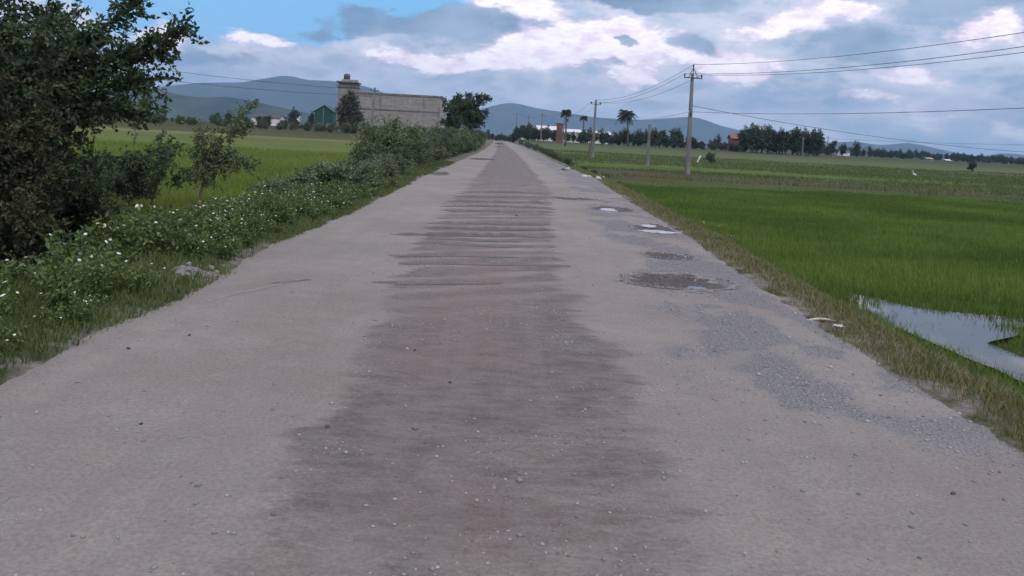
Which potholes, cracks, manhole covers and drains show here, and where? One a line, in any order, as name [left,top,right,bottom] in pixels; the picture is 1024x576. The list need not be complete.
pothole [613,272,738,293]
crack [208,279,312,301]
pothole [627,222,683,235]
pothole [641,250,698,261]
